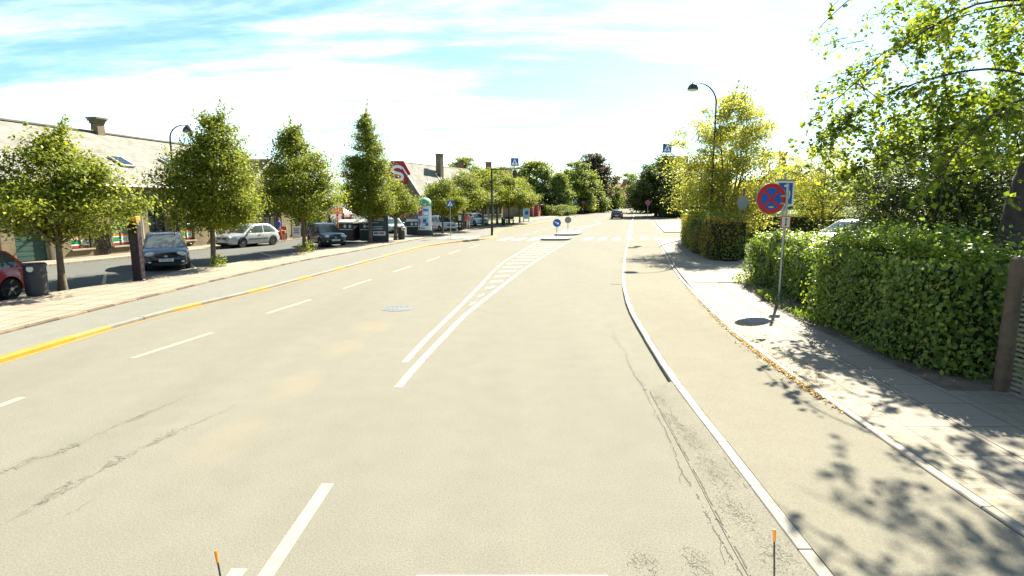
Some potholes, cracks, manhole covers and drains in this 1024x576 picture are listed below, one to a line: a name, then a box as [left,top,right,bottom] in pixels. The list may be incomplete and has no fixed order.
crack [610,324,743,576]
crack [0,406,238,526]
